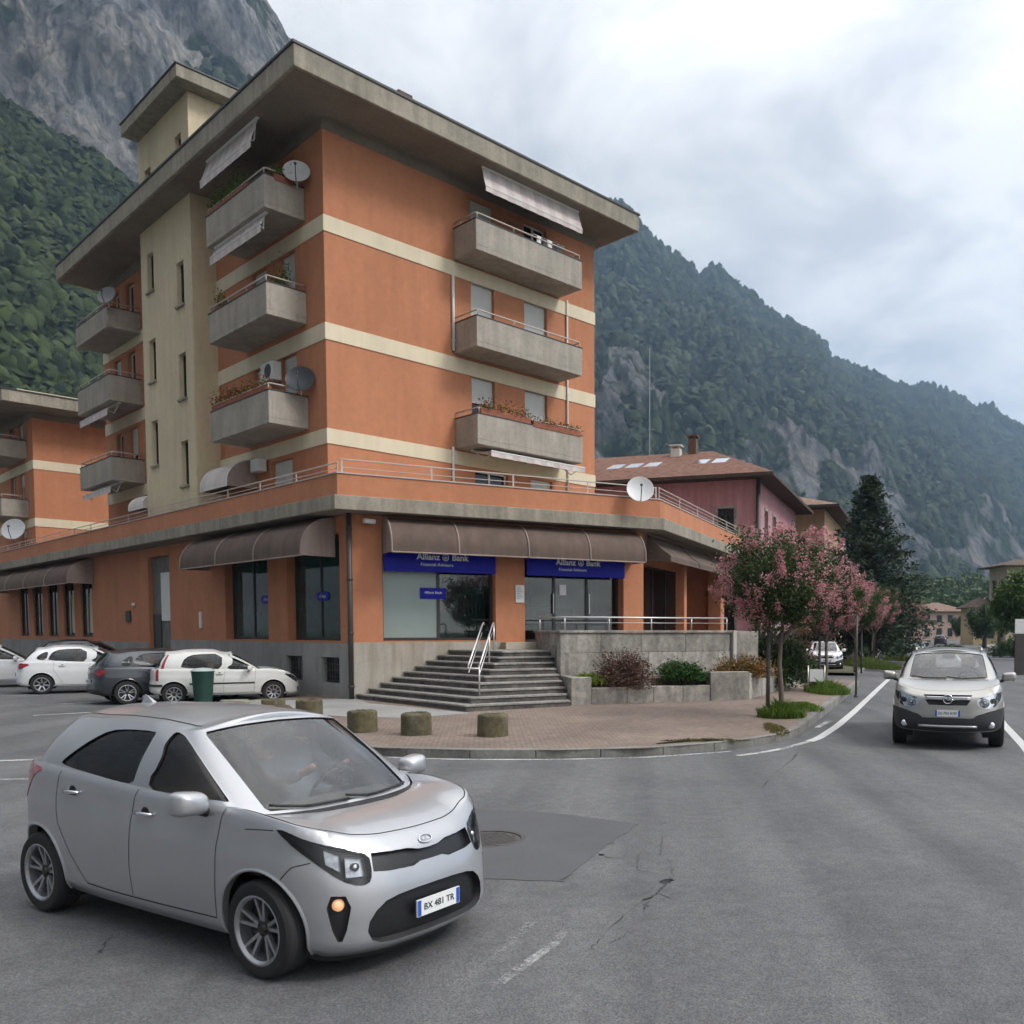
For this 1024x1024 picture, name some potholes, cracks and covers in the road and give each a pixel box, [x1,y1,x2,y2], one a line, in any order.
crack [585,840,672,952]
manhole cover [479,830,526,848]
